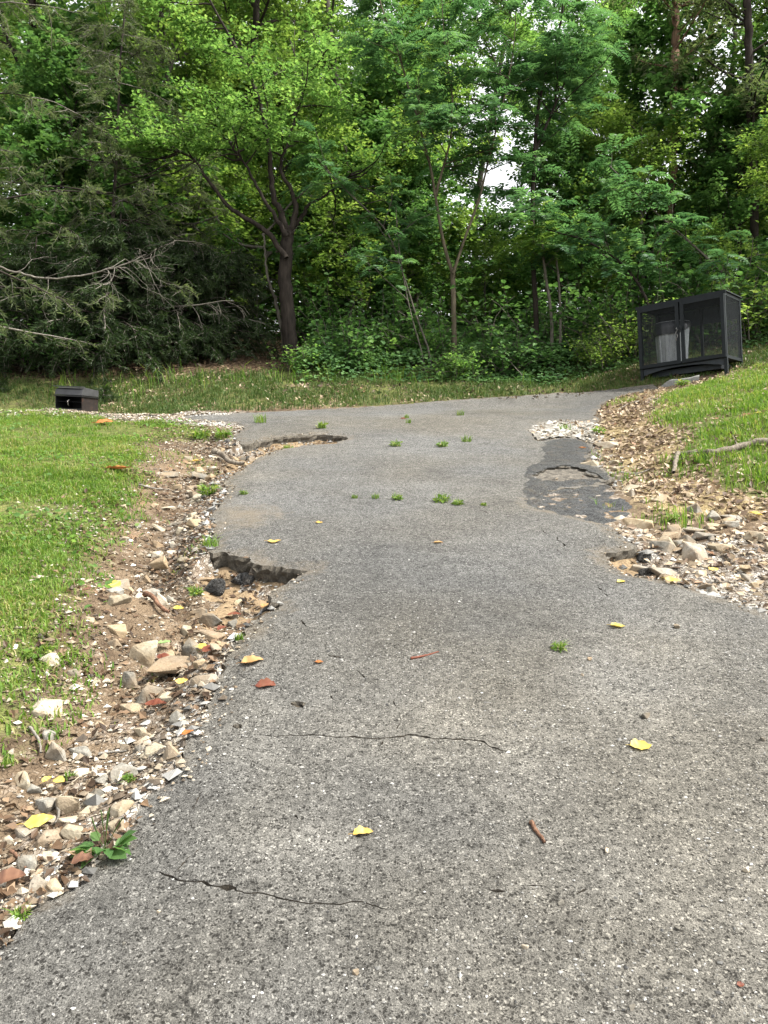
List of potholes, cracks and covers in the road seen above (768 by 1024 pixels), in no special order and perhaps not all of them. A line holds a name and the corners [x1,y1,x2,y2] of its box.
crack [159,795,384,909]
crack [266,699,511,753]
pothole [224,440,337,475]
